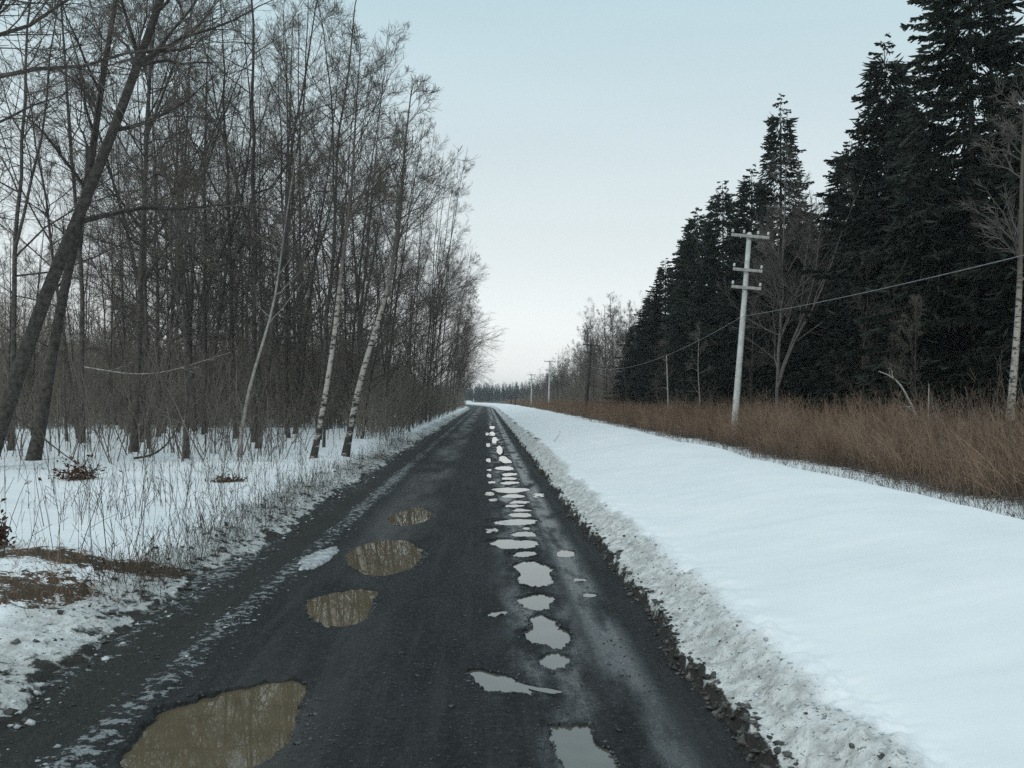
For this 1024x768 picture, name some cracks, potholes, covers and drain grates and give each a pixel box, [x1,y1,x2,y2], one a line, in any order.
pothole [526,650,581,673]
pothole [339,539,433,577]
pothole [484,518,545,526]
pothole [511,559,560,588]
pothole [552,549,581,558]
pothole [382,506,438,527]
pothole [458,665,572,699]
pothole [507,592,563,612]
pothole [512,611,581,654]
pothole [102,677,316,768]
pothole [539,719,628,768]
pothole [478,536,544,550]
